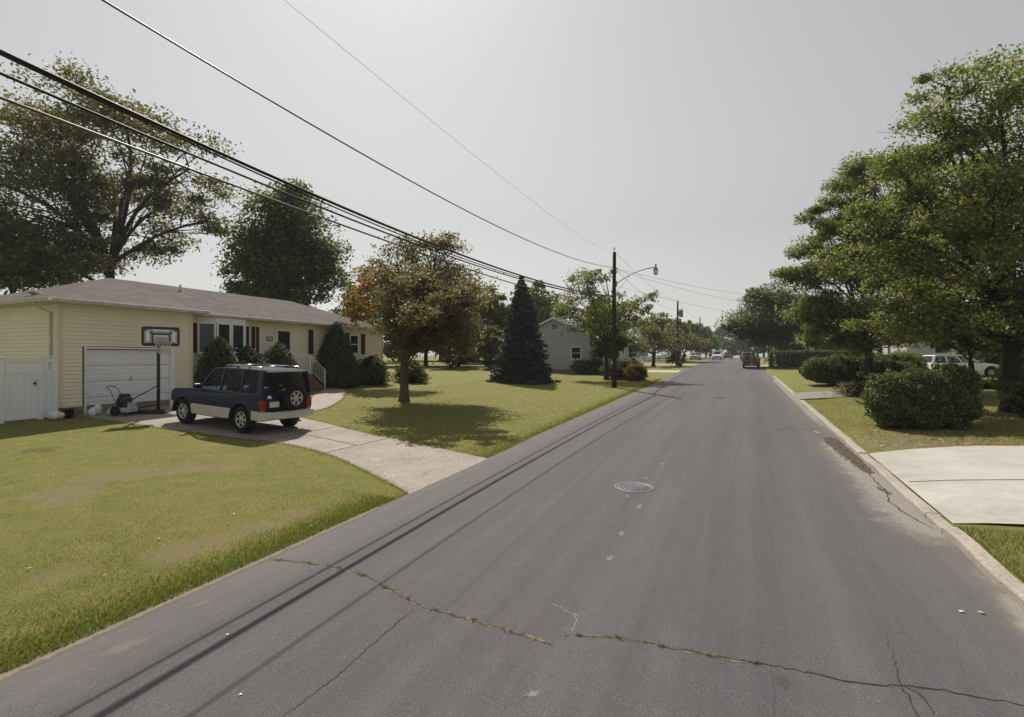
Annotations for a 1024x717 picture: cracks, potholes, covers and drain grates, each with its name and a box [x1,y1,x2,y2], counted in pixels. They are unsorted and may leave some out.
crack [869,473,933,529]
manhole cover [615,482,654,493]
crack [268,559,1024,717]
